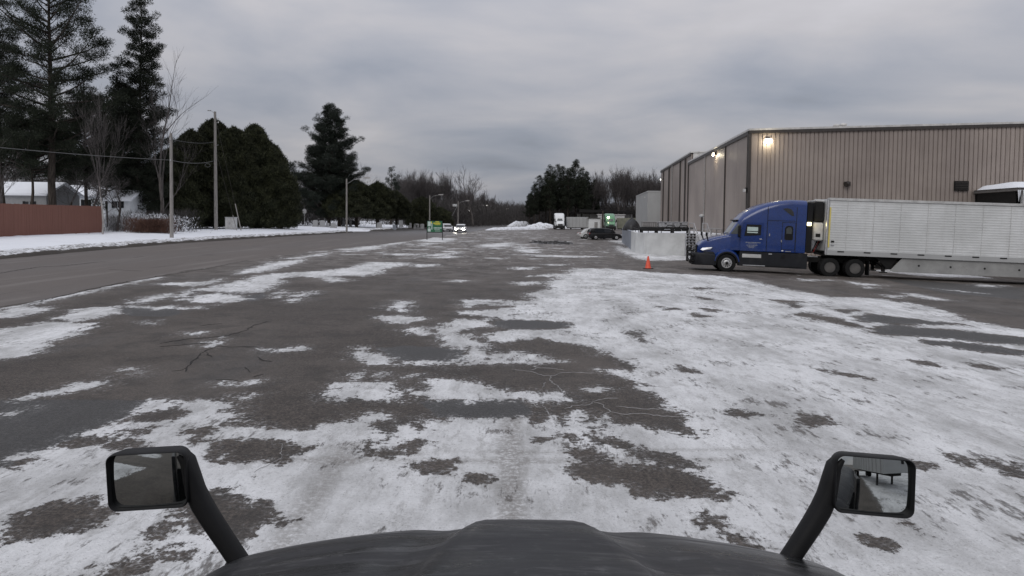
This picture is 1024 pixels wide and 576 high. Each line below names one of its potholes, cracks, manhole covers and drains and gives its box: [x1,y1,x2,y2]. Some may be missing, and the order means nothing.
crack [515,367,677,422]
crack [160,321,268,381]
